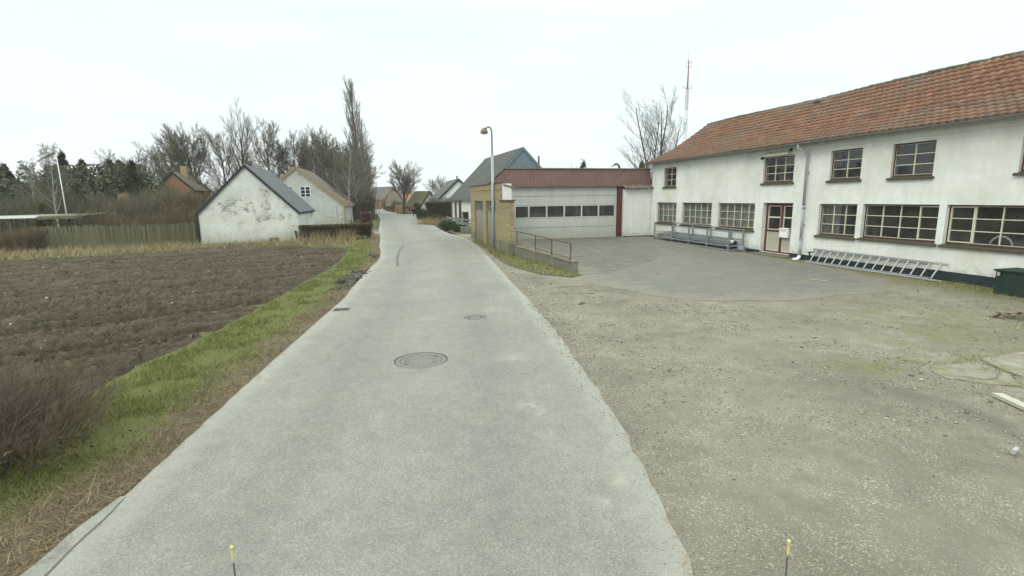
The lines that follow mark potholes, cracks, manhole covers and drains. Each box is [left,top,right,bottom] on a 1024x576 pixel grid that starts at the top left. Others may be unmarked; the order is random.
manhole cover [395,353,447,369]
